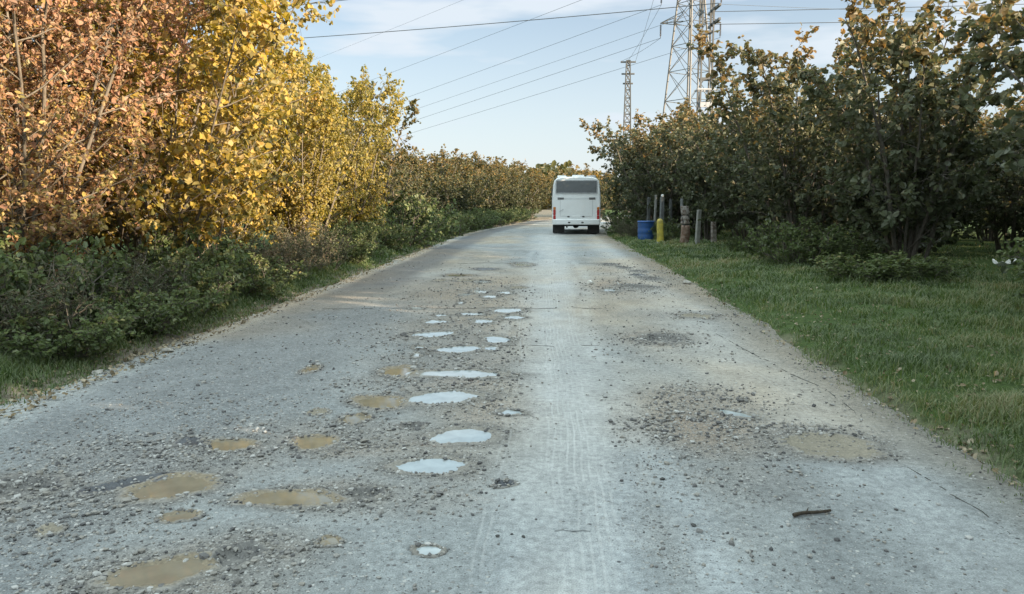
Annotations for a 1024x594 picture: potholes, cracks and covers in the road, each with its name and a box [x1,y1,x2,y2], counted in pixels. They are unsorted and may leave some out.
pothole [409,544,448,558]
pothole [348,395,410,412]
crack [717,334,855,412]
pothole [399,389,493,406]
pothole [636,333,688,344]
pothole [406,330,463,338]
pothole [286,433,342,452]
crack [908,467,1009,533]
pothole [419,425,506,446]
pothole [477,334,515,344]
pothole [382,455,477,477]
